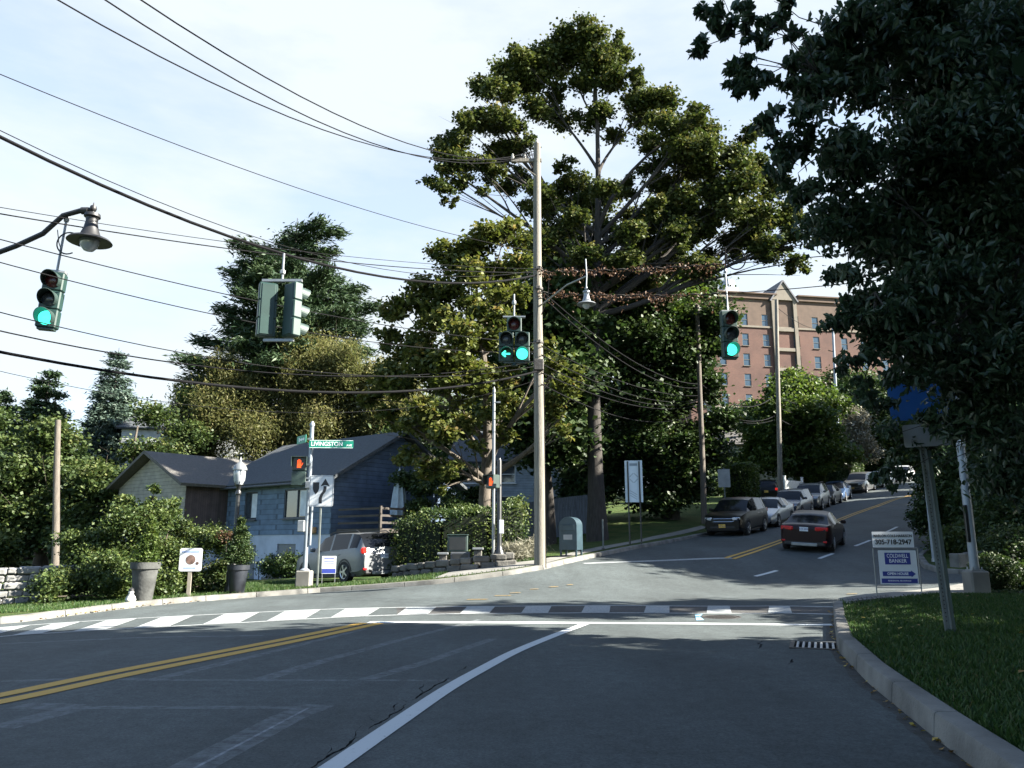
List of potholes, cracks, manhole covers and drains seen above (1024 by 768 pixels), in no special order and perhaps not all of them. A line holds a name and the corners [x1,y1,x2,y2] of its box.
crack [311,666,466,768]
drain grate [789,640,838,650]
